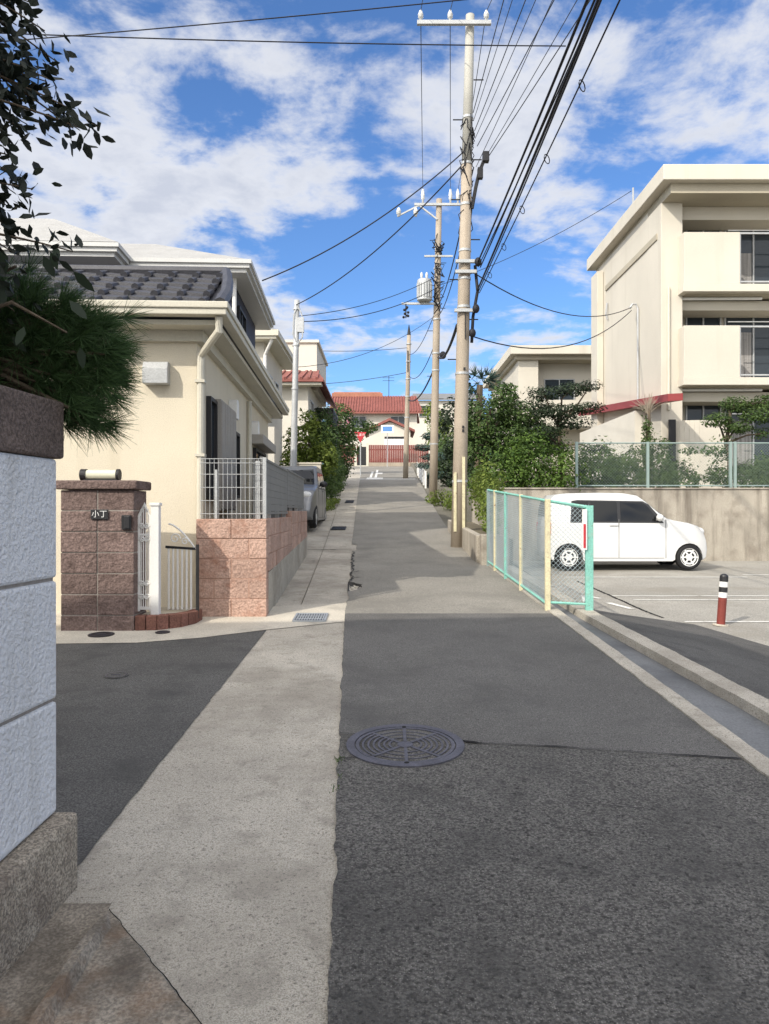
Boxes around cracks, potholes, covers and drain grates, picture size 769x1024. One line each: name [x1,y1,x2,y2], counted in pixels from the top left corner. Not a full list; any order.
manhole cover [346,724,465,768]
drain grate [292,613,328,622]
crack [349,551,357,581]
